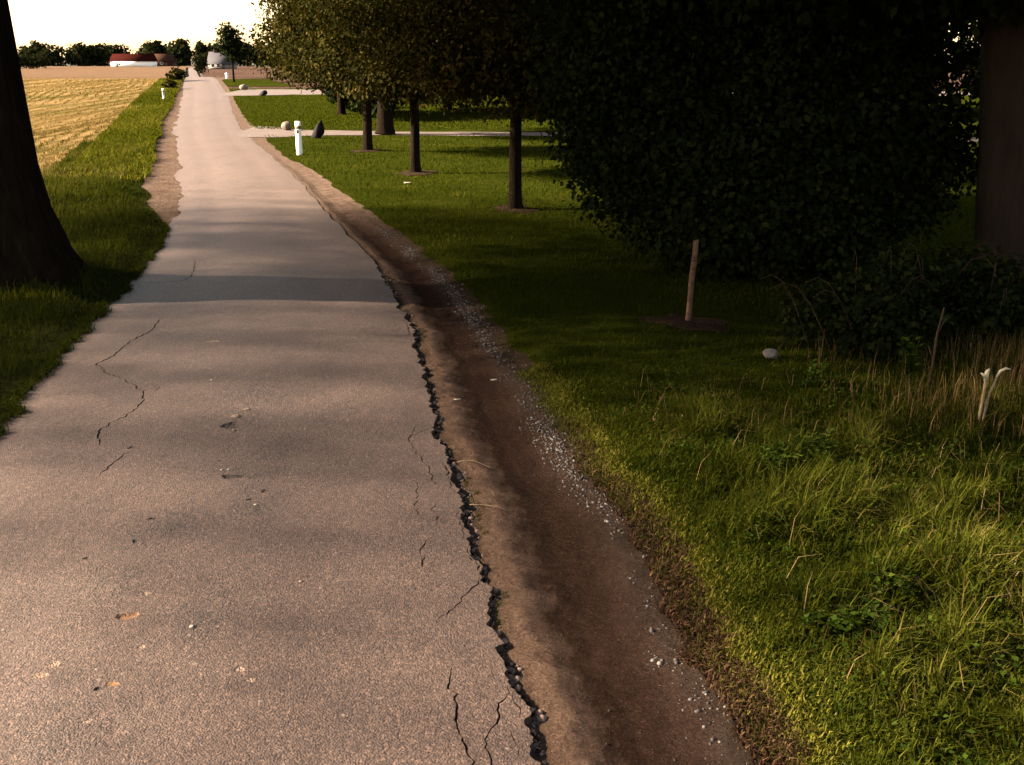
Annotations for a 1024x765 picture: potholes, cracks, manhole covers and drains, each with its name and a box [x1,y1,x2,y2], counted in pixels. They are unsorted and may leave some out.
crack [374,260,548,765]
crack [95,320,160,477]
